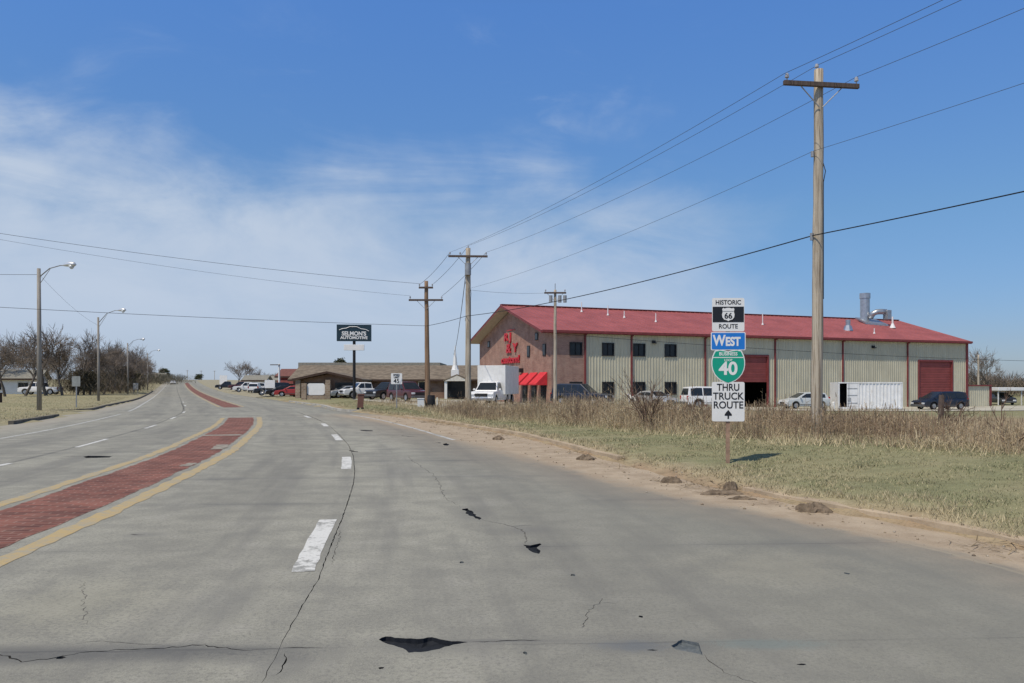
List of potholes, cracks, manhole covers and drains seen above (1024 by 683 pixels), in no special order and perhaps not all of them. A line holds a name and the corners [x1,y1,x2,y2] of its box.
pothole [379,636,466,653]
pothole [672,640,702,655]
crack [411,459,527,542]
